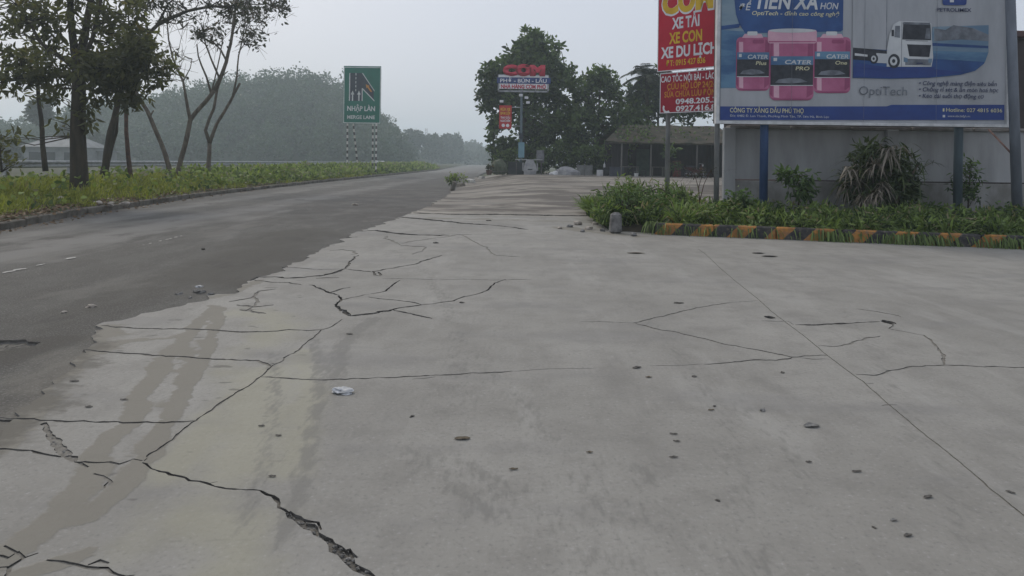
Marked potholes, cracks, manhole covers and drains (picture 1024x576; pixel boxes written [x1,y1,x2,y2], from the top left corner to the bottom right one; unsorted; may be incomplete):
crack [0,417,190,488]
crack [144,463,375,576]
crack [811,309,1024,376]
crack [597,301,820,365]
crack [0,546,134,576]
crack [229,213,587,318]
